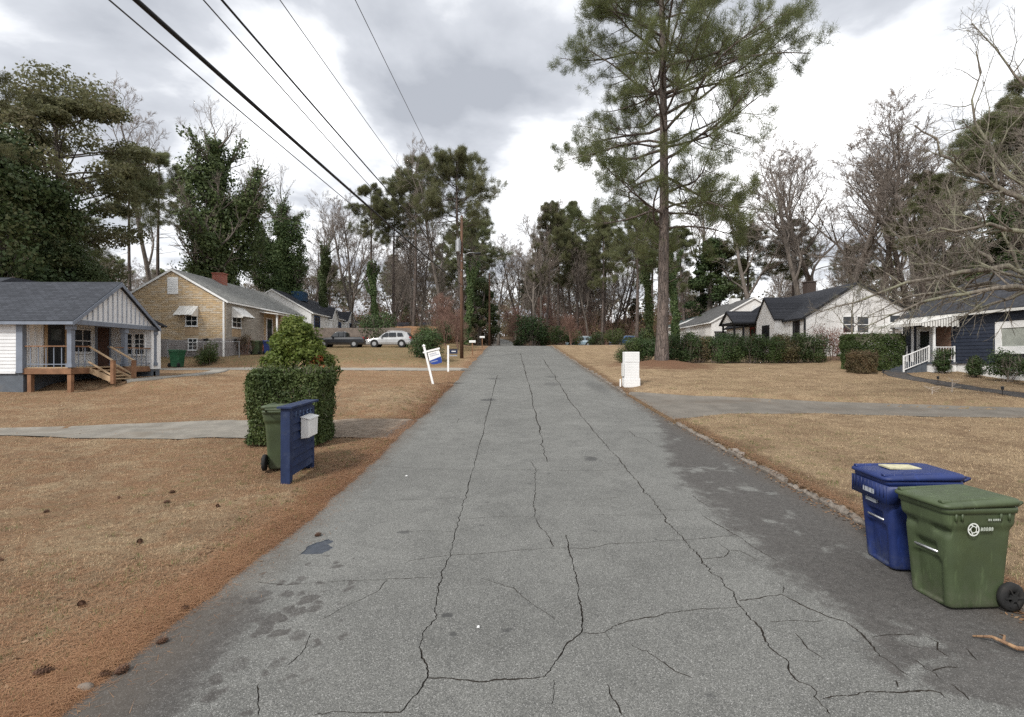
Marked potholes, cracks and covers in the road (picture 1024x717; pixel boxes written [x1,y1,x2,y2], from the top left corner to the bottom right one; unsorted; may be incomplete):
crack [260,354,978,716]
